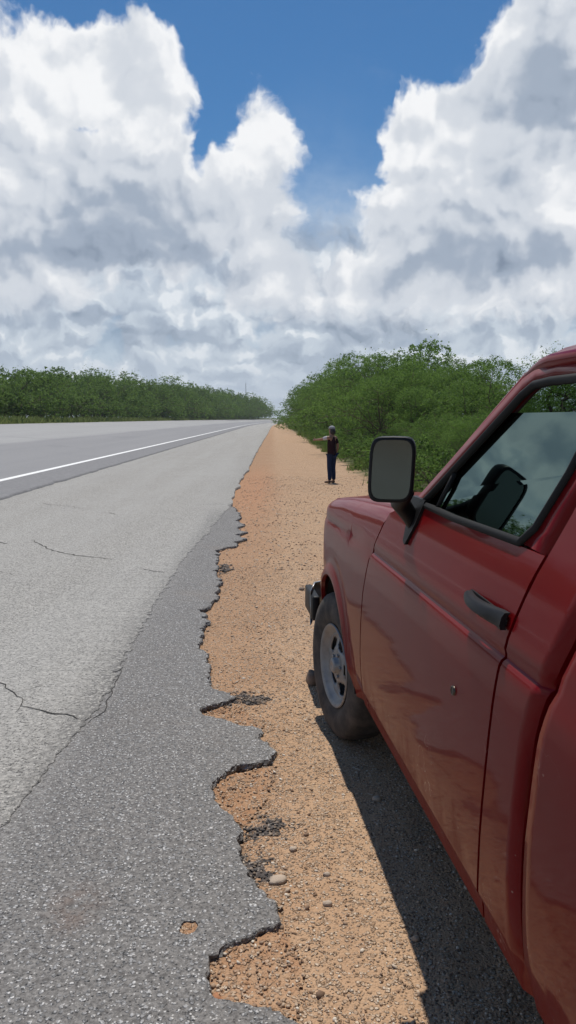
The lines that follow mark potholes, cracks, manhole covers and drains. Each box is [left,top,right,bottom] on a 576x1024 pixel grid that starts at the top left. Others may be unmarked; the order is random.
pothole [180,922,198,934]
crack [0,667,123,722]
